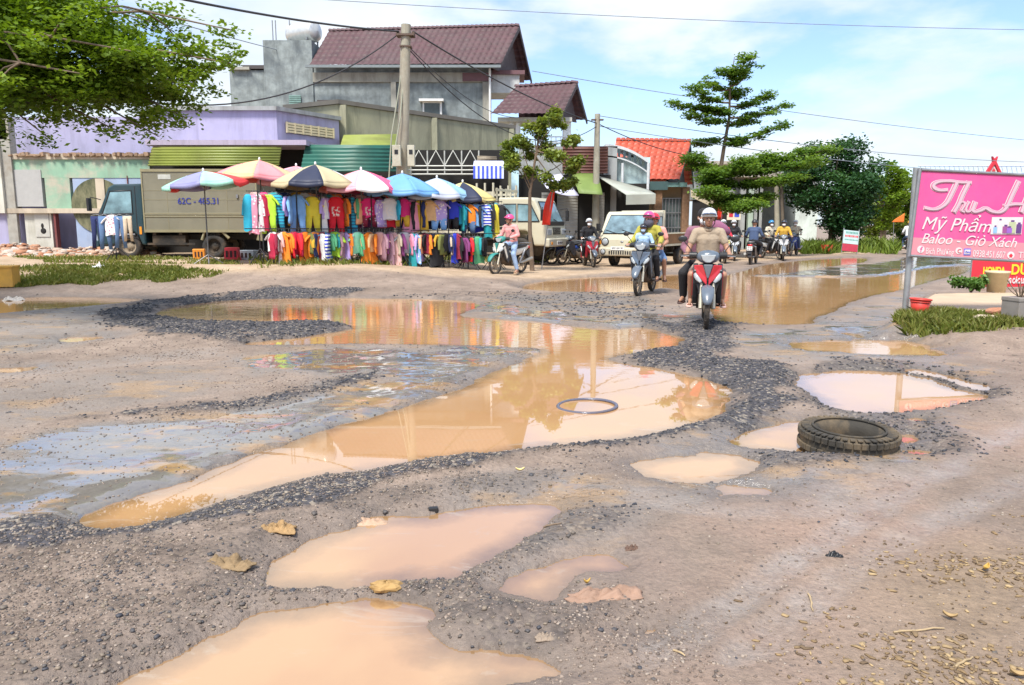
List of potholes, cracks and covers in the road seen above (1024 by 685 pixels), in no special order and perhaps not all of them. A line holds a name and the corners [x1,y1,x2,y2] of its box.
pothole [484,543,638,602]
pothole [726,256,872,276]
pothole [67,293,743,529]
pothole [621,443,770,486]
pothole [514,264,971,325]
pothole [718,411,877,453]
pothole [774,330,963,356]
pothole [84,589,575,685]
pothole [254,494,570,594]
pothole [699,478,786,499]
pothole [781,362,1003,415]
